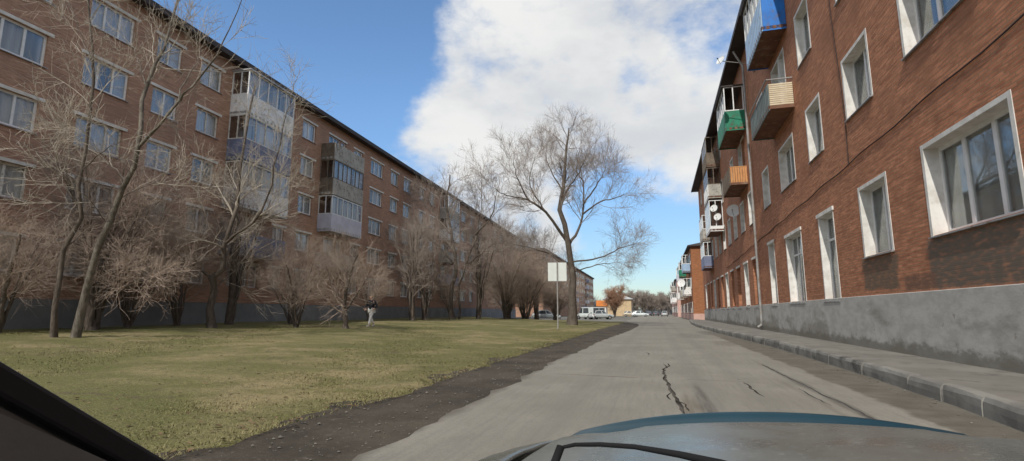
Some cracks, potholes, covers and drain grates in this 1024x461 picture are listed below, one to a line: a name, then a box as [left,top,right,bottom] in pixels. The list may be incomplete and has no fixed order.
crack [571,353,717,414]
